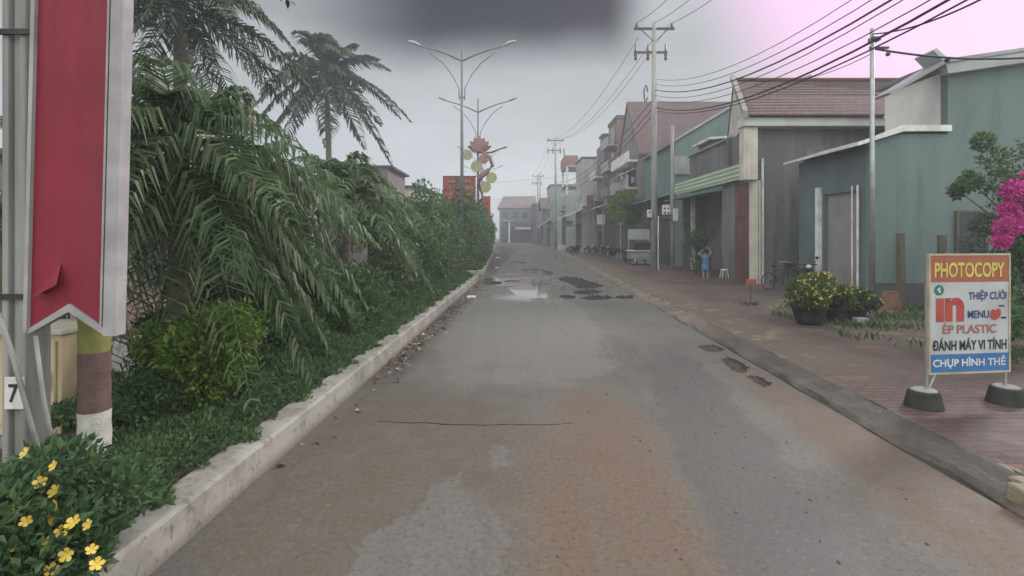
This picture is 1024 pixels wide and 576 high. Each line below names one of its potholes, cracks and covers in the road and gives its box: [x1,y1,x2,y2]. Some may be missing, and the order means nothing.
pothole [559,276,604,288]
pothole [747,375,772,387]
pothole [721,355,750,373]
